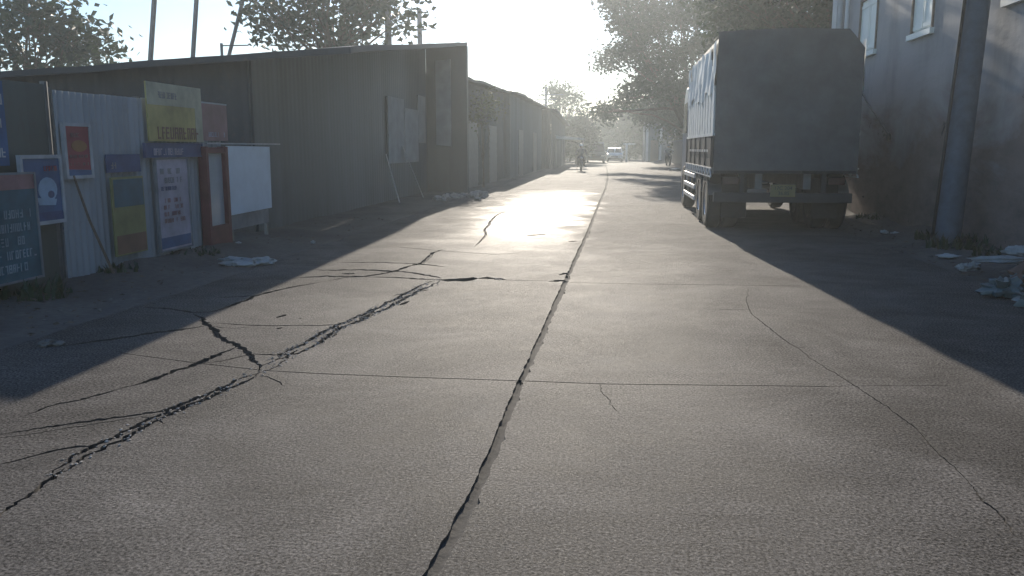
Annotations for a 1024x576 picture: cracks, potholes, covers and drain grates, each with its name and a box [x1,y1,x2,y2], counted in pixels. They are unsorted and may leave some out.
crack [0,249,506,517]
crack [474,212,503,247]
crack [724,296,1013,534]
